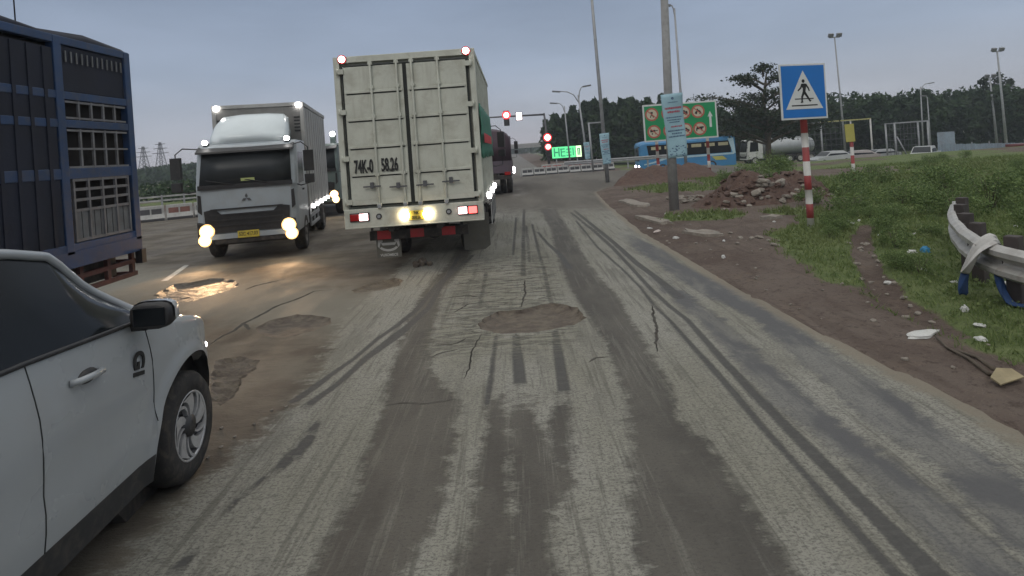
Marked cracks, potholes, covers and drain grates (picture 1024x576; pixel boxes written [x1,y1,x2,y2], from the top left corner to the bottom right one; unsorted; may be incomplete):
crack [209,280,323,345]
pothole [256,314,331,338]
crack [448,265,552,312]
pothole [351,278,403,293]
crack [651,306,659,352]
crack [432,336,481,378]
pothole [153,278,240,303]
pothole [210,356,260,406]
pothole [478,303,587,334]
